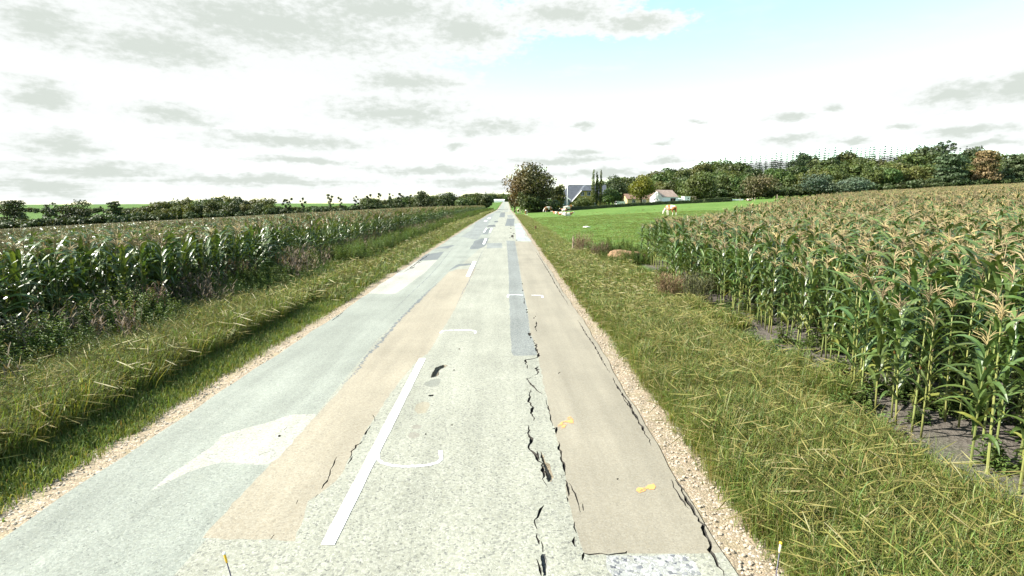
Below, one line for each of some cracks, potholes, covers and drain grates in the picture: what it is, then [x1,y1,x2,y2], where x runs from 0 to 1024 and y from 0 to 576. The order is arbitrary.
crack [524,322,558,487]
crack [580,324,651,444]
crack [534,505,544,576]
crack [672,480,724,576]
crack [322,415,375,488]
